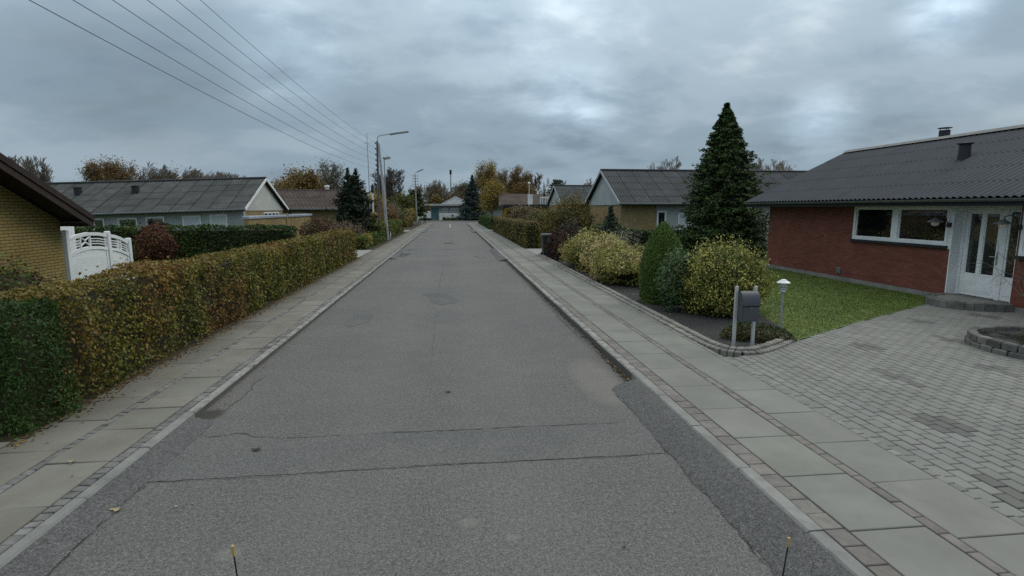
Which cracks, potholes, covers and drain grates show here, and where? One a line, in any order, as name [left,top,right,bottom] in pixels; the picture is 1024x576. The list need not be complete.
crack [213,422,617,438]
